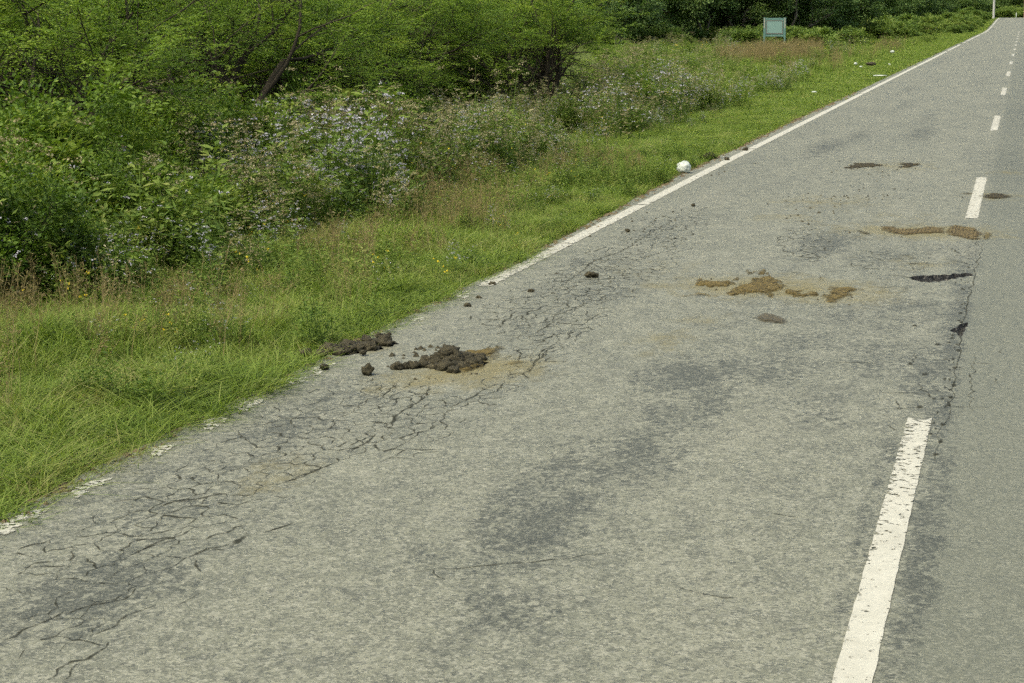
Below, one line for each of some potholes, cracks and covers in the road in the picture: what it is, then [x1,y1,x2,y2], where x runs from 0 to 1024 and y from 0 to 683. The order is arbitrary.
crack [844,237,997,460]
crack [1,378,396,680]
crack [350,207,709,462]
pothole [950,322,968,336]
crack [381,548,643,579]
pothole [909,273,973,283]
